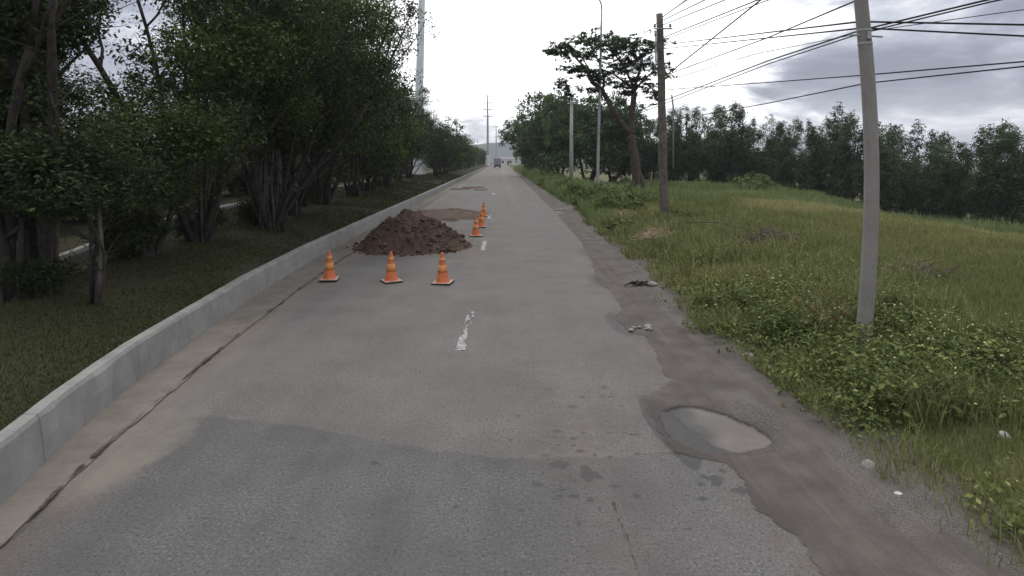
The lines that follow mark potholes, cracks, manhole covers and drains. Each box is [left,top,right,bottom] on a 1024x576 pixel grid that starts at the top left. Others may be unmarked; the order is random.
crack [612,500,640,575]
pothole [660,407,776,453]
